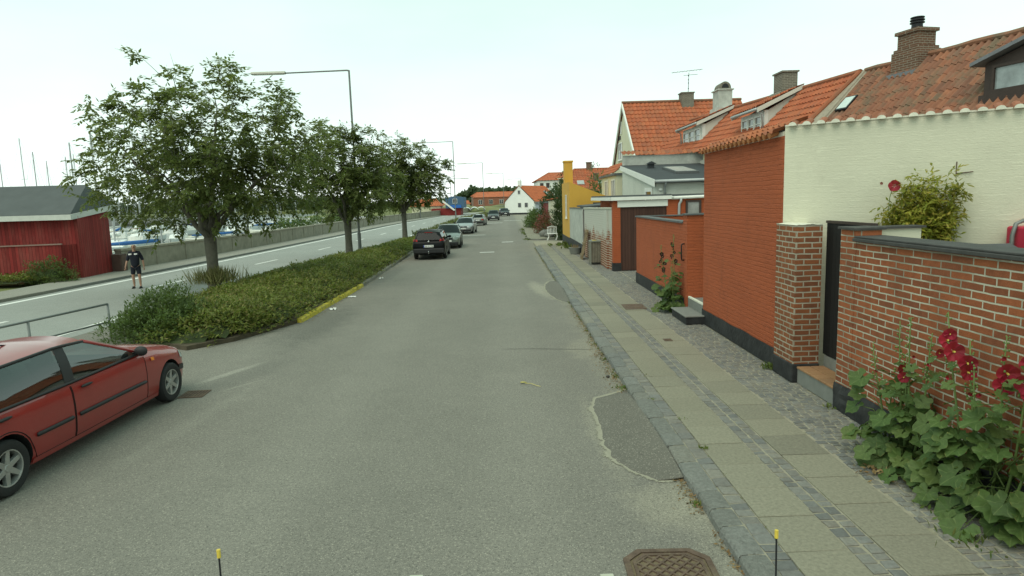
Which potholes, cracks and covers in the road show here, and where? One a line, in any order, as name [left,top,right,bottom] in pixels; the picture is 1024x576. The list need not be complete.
drain grate [178,390,211,398]
manhole cover [623,548,720,576]
